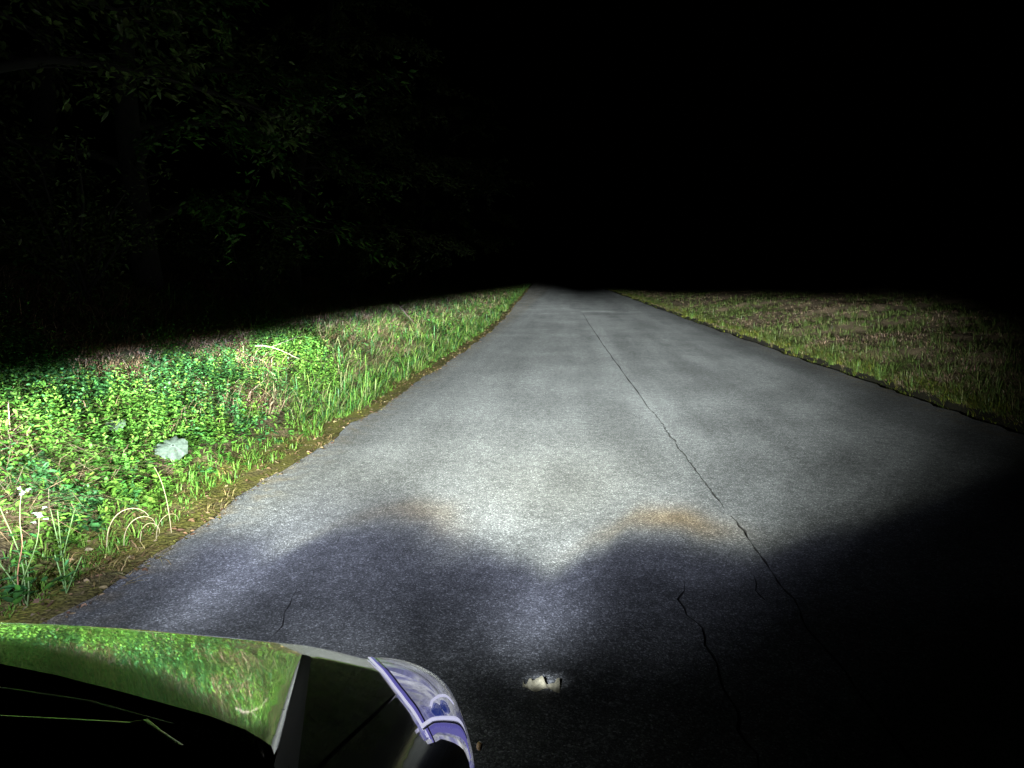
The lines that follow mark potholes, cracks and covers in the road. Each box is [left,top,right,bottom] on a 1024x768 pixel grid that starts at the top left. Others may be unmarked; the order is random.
crack [584,316,919,768]
crack [275,534,342,634]
